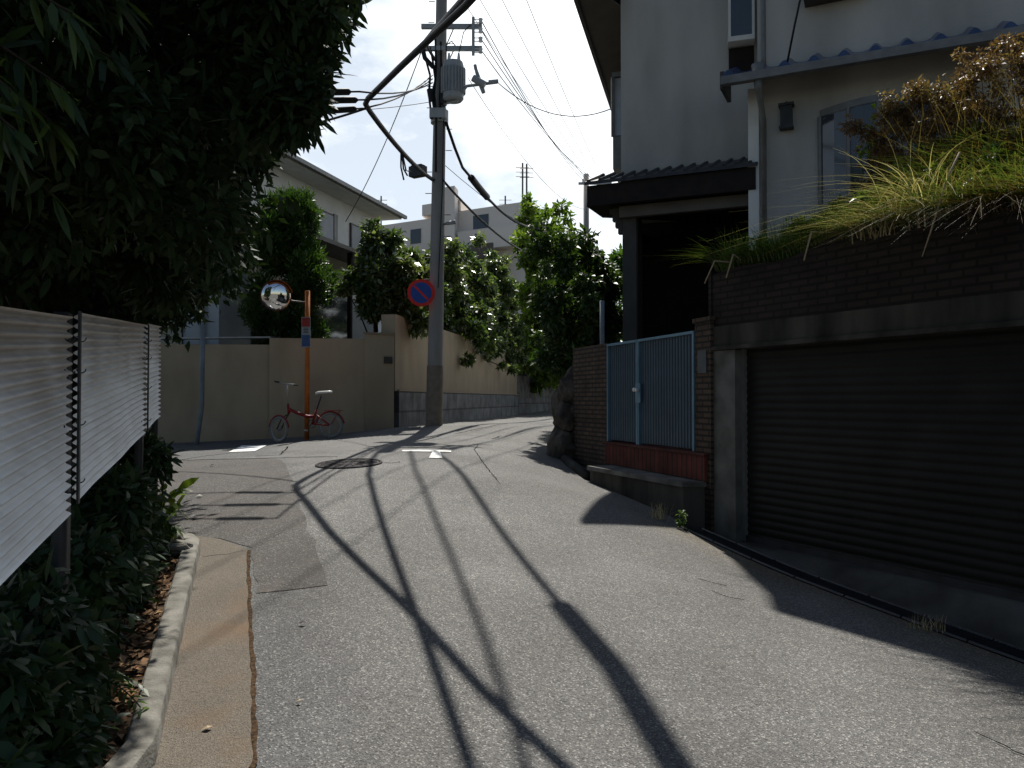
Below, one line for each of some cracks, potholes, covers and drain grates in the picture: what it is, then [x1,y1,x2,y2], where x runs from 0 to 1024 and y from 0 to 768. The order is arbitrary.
manhole cover [315,458,383,469]
